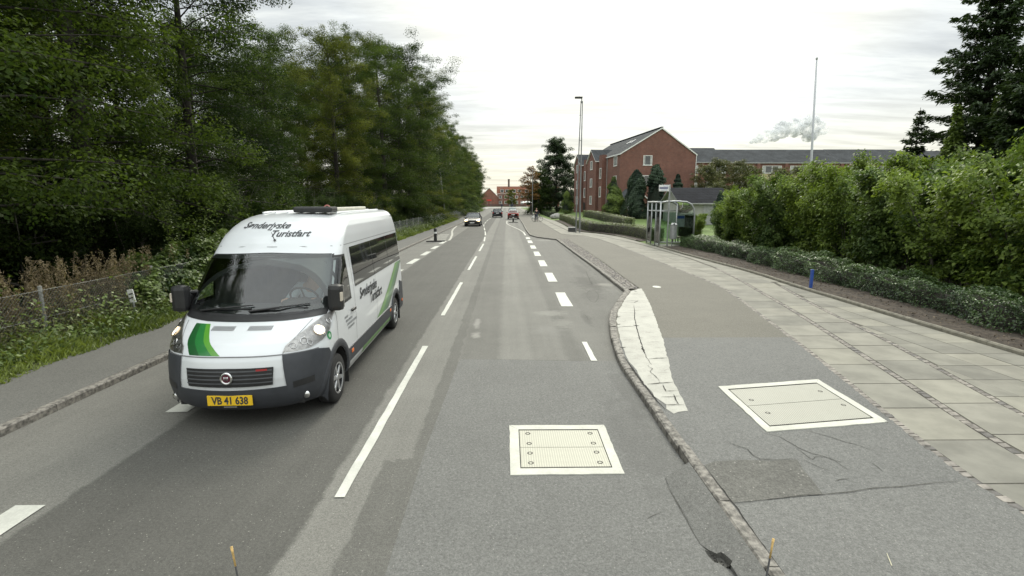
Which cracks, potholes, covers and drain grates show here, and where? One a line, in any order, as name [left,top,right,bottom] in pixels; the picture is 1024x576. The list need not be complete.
crack [726,430,894,481]
manhole cover [509,425,625,476]
manhole cover [718,379,888,432]
pothole [705,550,732,568]
